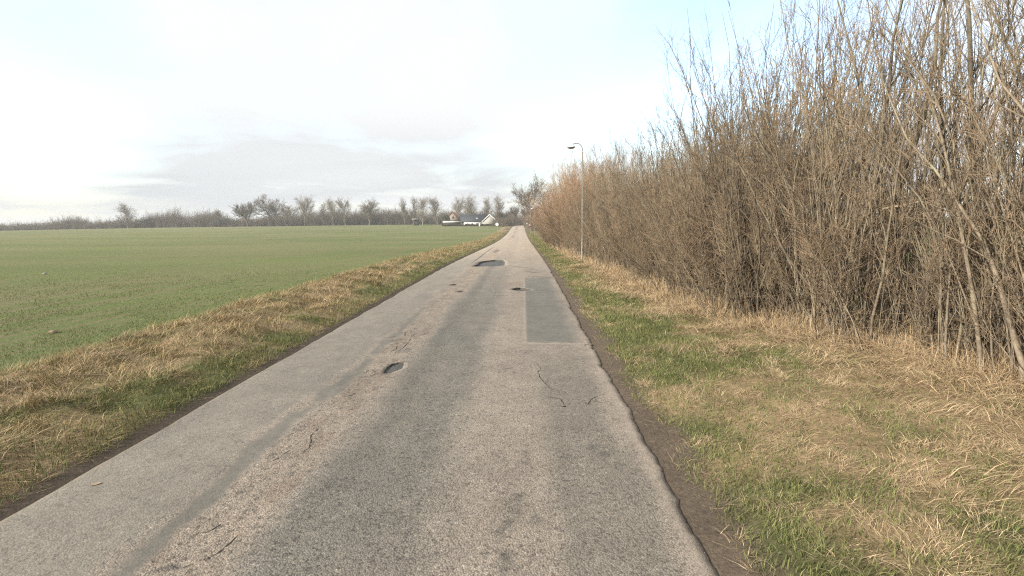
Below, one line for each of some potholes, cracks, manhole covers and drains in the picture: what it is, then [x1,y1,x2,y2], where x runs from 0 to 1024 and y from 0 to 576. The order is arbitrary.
crack [534,363,568,406]
crack [362,332,421,378]
crack [585,396,600,404]
crack [269,428,323,462]
pothole [378,361,409,375]
crack [167,523,242,572]
